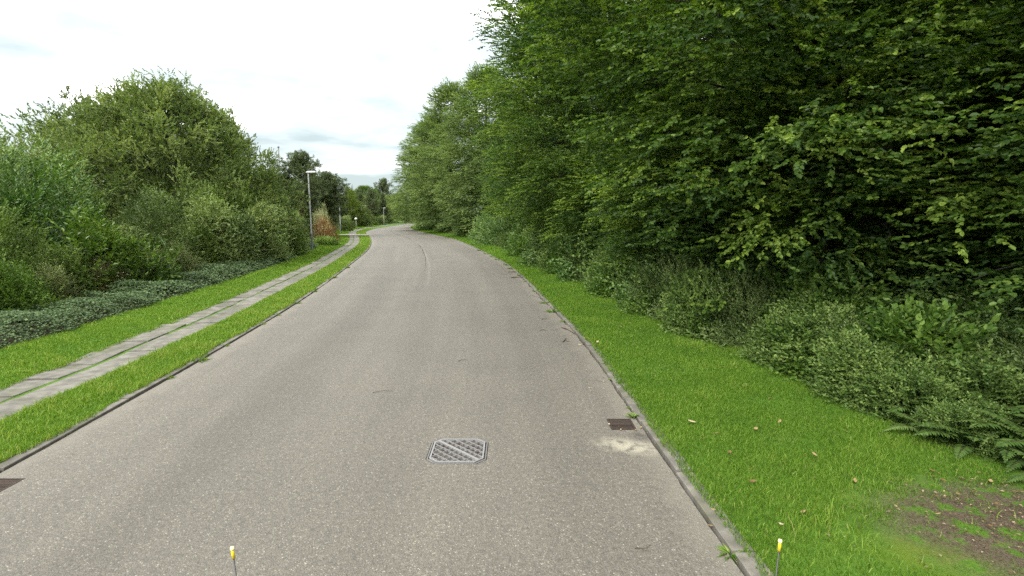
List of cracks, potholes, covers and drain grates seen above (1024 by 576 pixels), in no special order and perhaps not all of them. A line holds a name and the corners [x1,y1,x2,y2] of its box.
drain grate [607,419,636,430]
drain grate [0,478,25,492]
